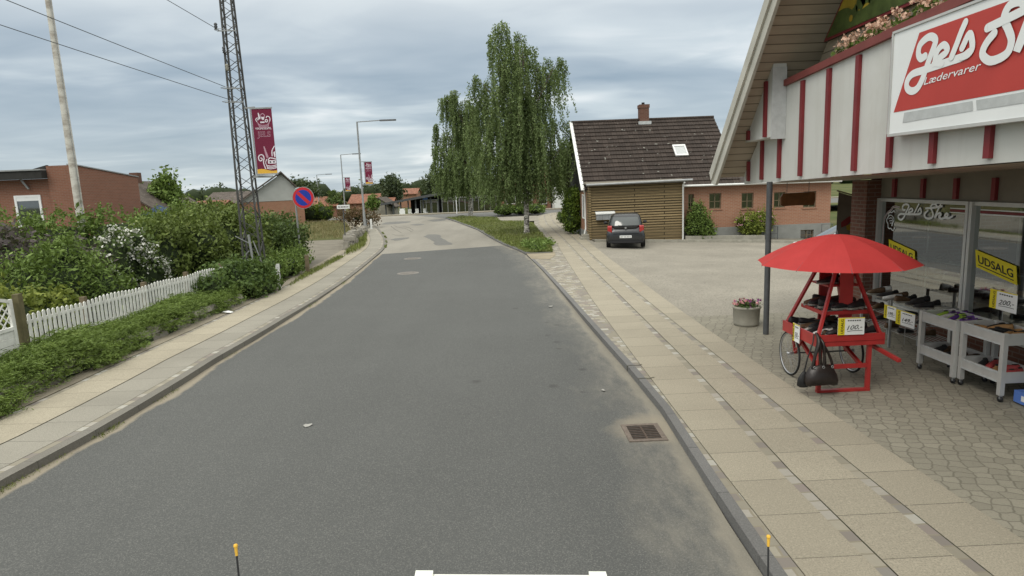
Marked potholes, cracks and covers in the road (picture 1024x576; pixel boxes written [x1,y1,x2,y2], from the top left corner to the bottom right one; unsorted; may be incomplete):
drain grate [621,423,668,442]
